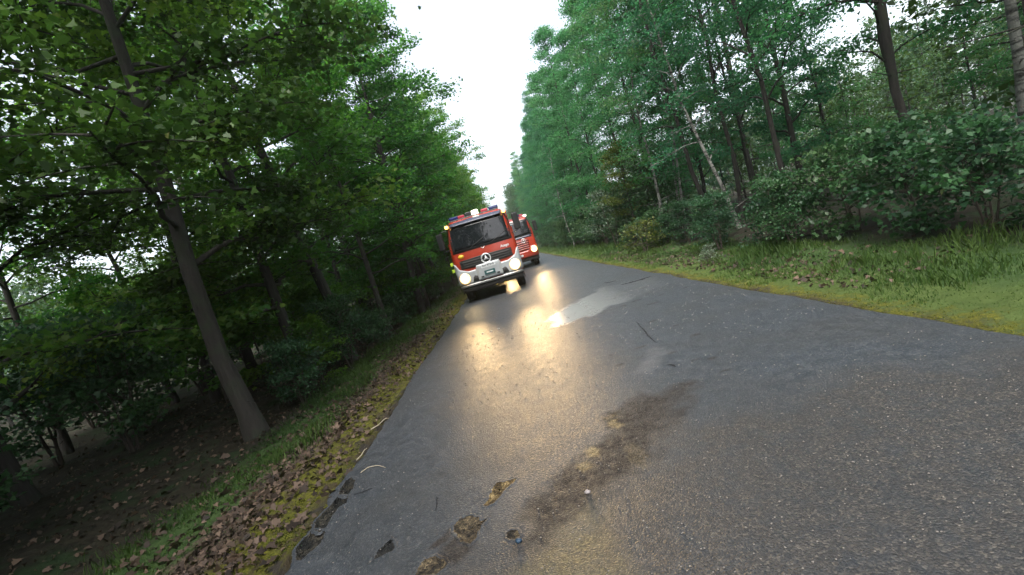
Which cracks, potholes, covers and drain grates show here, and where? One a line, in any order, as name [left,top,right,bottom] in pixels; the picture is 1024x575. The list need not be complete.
pothole [292,527,328,563]
pothole [451,513,492,546]
pothole [372,536,398,562]
pothole [481,477,520,508]
pothole [413,553,450,575]
pothole [503,527,524,542]
pothole [311,494,351,535]
pothole [337,476,357,499]
